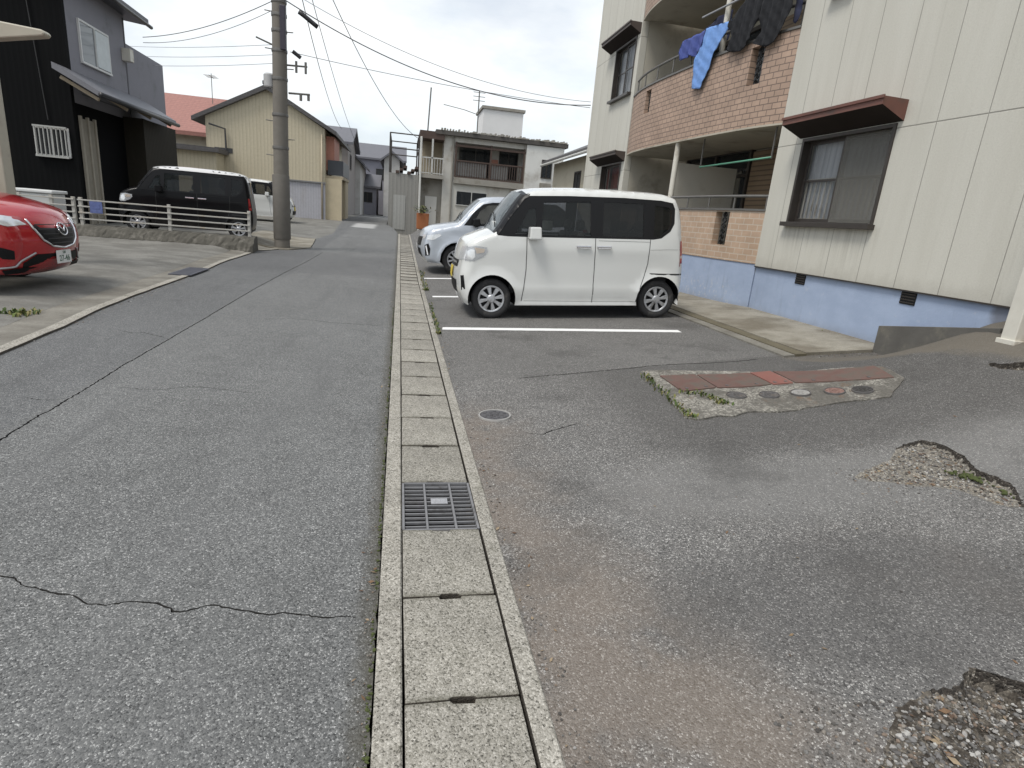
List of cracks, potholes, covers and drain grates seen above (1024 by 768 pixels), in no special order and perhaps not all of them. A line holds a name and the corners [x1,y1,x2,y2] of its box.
pothole [828,440,1024,508]
drain grate [402,482,480,533]
manhole cover [726,391,747,399]
manhole cover [478,409,511,422]
crack [0,575,356,619]
pothole [989,362,1024,371]
manhole cover [823,387,846,395]
manhole cover [790,389,811,397]
manhole cover [851,386,874,394]
pothole [773,667,1024,768]
crack [0,252,323,441]
